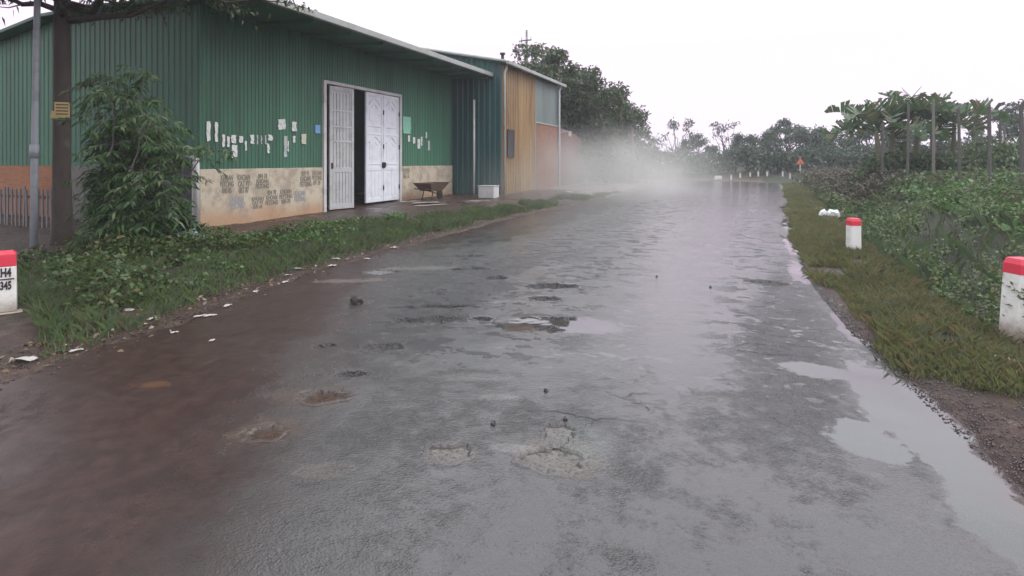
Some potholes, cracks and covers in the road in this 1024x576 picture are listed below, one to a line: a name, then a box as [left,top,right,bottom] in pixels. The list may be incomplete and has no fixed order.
pothole [295,388,357,406]
pothole [335,369,371,379]
crack [522,392,664,424]
pothole [421,441,478,467]
pothole [510,442,591,478]
pothole [354,342,408,353]
pothole [388,314,480,324]
pothole [521,282,582,290]
pothole [239,422,291,443]
